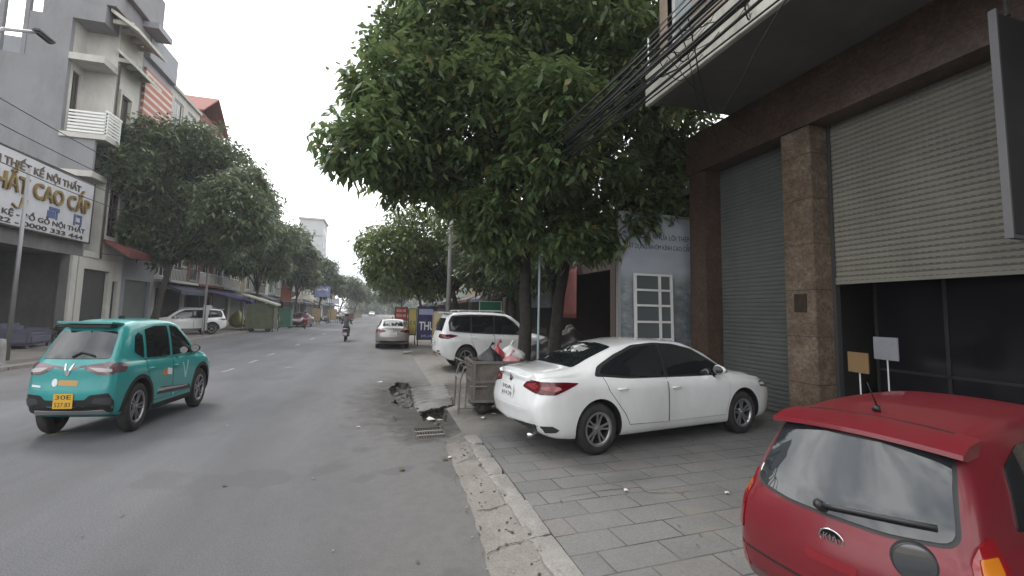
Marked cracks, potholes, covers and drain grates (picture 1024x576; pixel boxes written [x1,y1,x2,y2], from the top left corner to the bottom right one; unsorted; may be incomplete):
drain grate [411,426,449,439]
pothole [418,408,448,434]
pothole [388,382,419,410]
